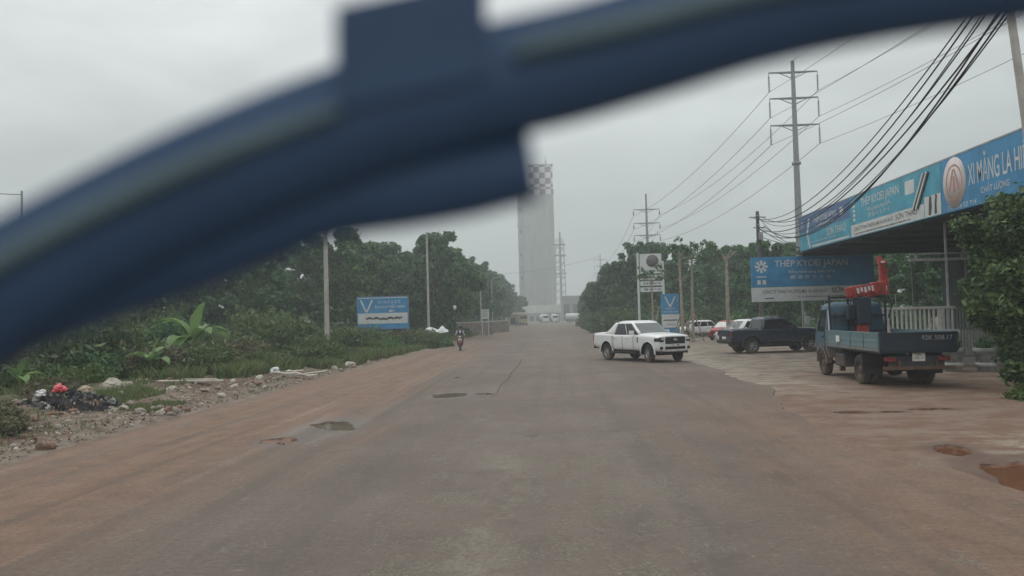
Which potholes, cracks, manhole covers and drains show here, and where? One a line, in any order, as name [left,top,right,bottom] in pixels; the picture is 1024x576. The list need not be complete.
pothole [310,421,355,431]
pothole [976,461,1024,491]
pothole [259,437,298,445]
pothole [933,444,972,456]
